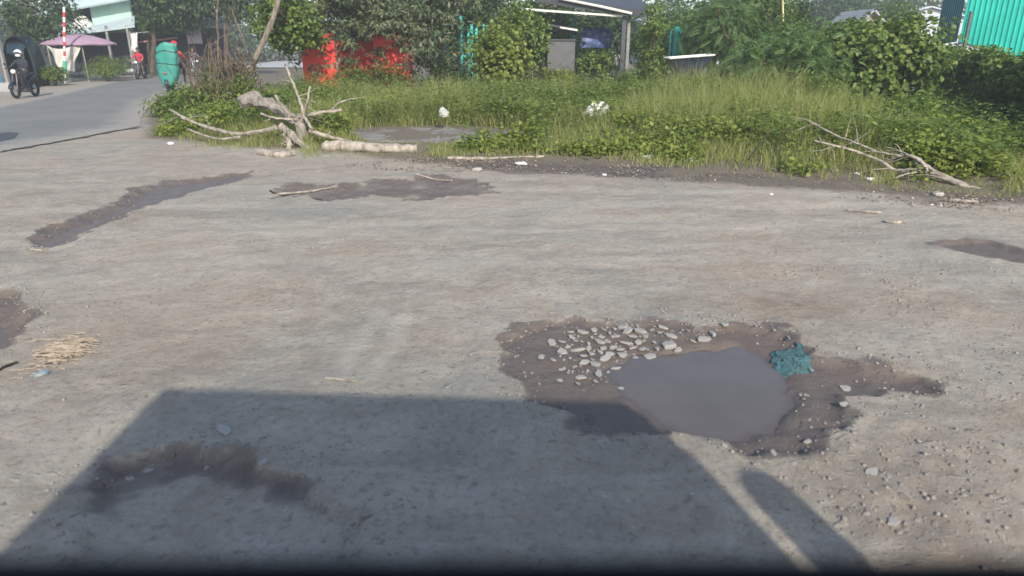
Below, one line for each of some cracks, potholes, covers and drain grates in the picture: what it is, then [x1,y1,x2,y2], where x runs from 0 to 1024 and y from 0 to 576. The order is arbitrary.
pothole [0,285,38,355]
pothole [929,238,1024,263]
pothole [60,441,373,560]
pothole [22,169,257,249]
pothole [497,314,948,457]
pothole [264,174,501,202]
